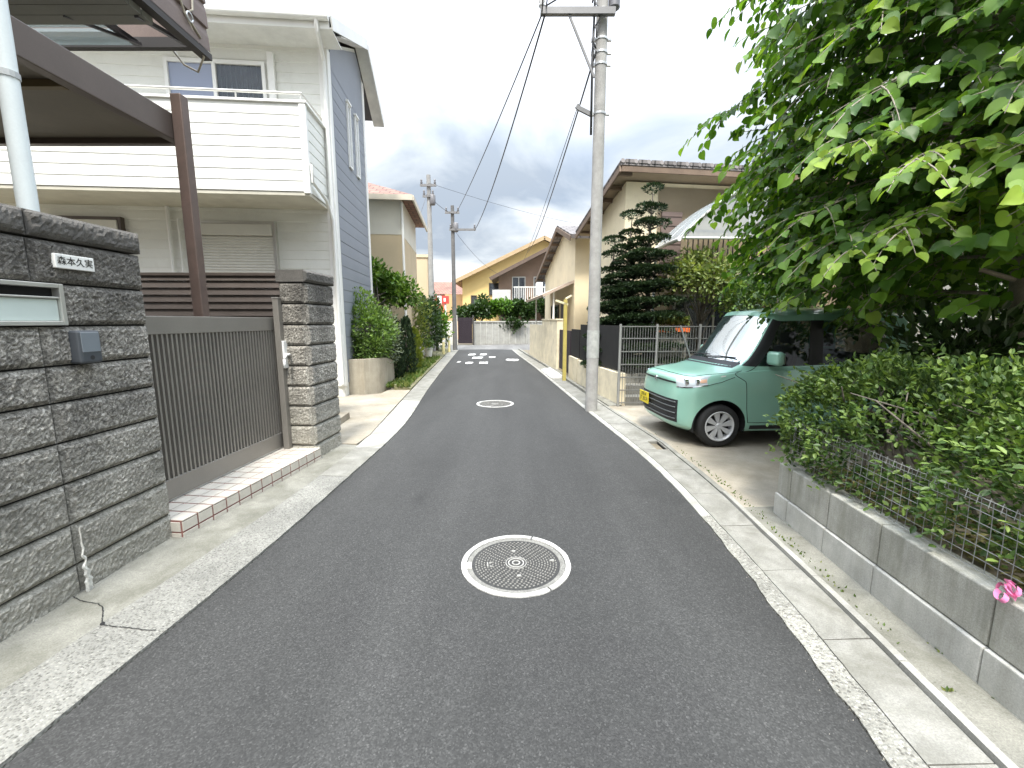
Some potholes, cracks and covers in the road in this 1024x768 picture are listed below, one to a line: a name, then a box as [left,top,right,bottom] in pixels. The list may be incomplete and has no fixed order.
manhole cover [477,400,514,408]
manhole cover [461,535,571,598]
crack [73,596,147,630]
